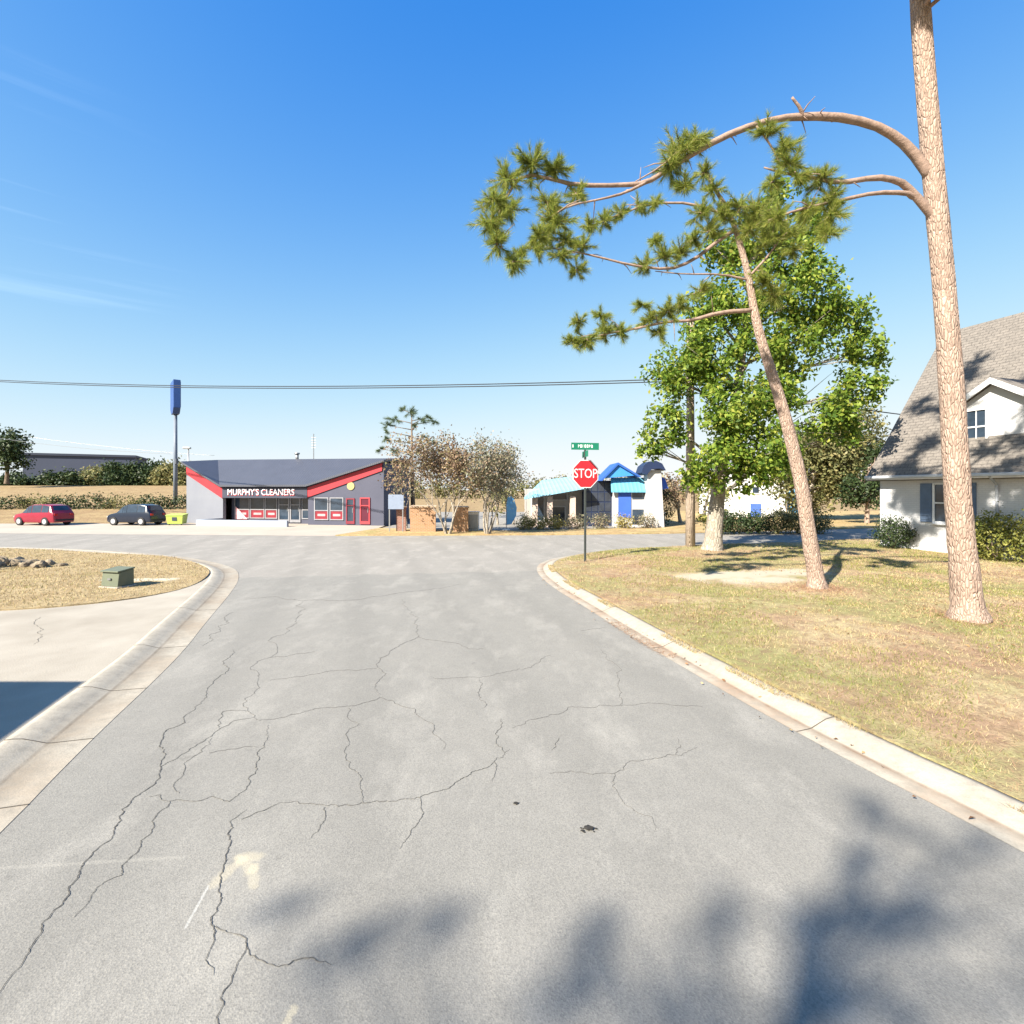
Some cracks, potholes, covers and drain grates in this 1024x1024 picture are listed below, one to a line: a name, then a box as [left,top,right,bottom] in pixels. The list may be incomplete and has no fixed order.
crack [0,585,509,991]
